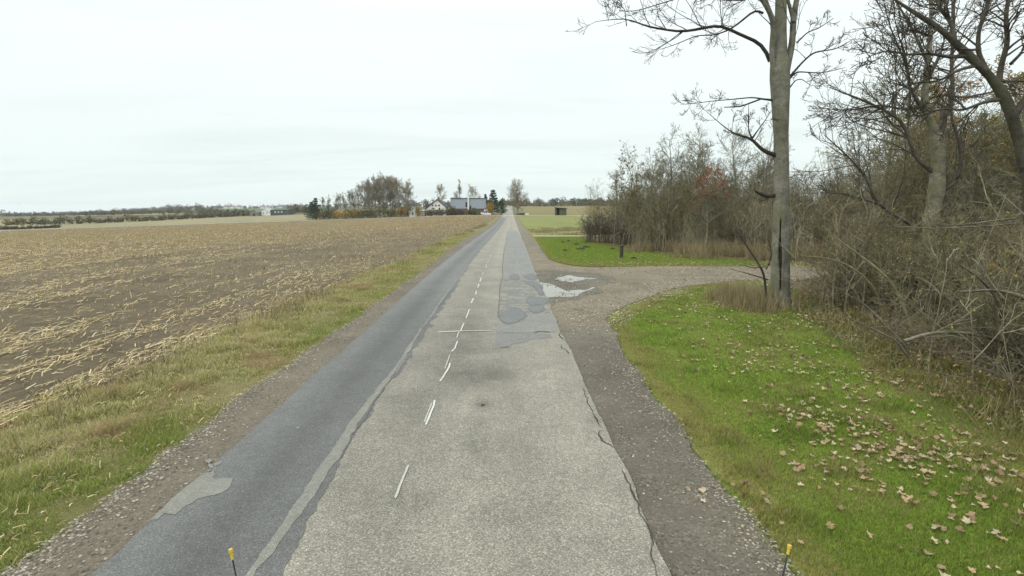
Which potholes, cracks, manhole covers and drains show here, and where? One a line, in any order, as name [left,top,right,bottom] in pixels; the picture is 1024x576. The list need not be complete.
crack [583,389,613,447]
crack [622,470,657,575]
